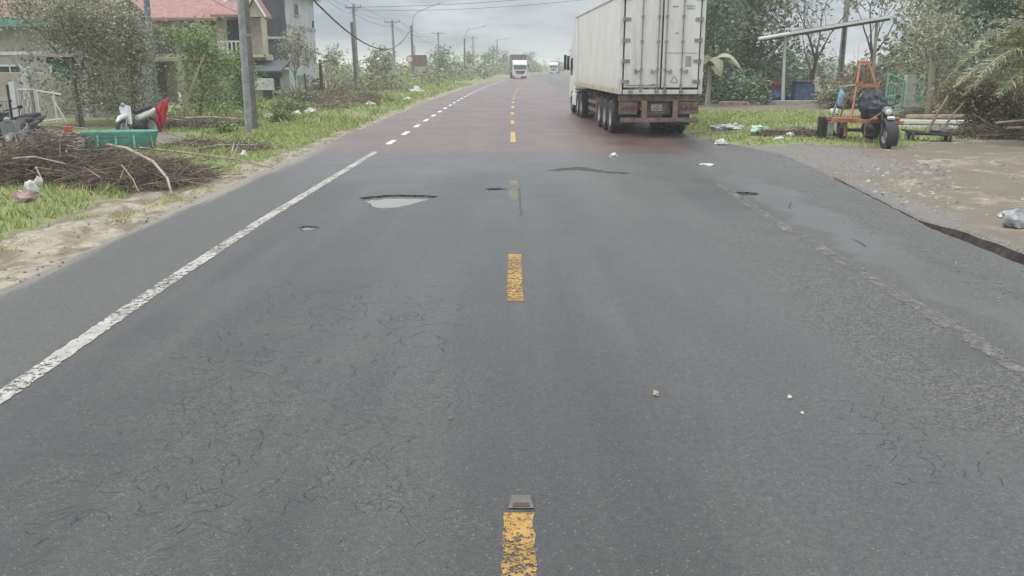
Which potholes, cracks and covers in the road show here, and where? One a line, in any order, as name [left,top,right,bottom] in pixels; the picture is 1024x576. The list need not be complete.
crack [22,379,437,549]
pothole [542,166,638,174]
pothole [353,193,447,209]
crack [157,281,464,383]
crack [831,396,1005,487]
